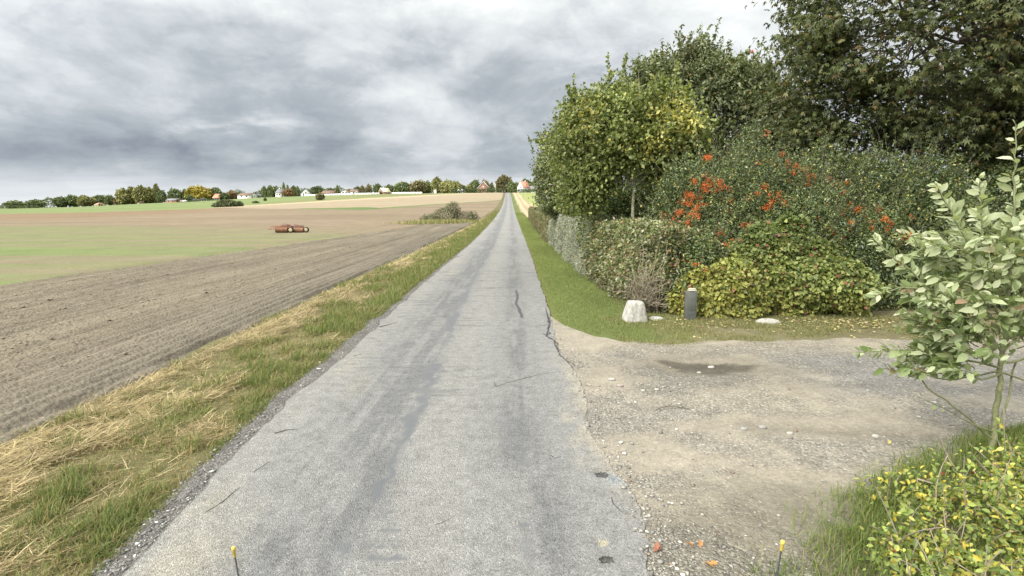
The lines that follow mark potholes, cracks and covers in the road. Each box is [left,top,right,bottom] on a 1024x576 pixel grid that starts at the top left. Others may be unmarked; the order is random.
crack [494,307,573,387]
